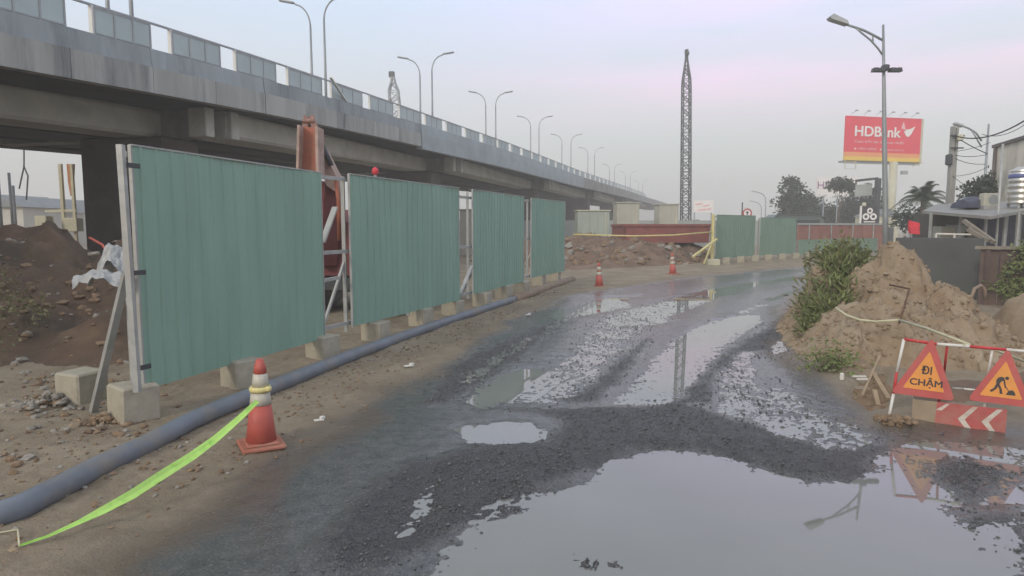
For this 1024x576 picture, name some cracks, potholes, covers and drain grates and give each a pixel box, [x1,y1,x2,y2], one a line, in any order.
pothole [454,365,560,412]
pothole [442,417,560,446]
pothole [394,436,1024,576]
